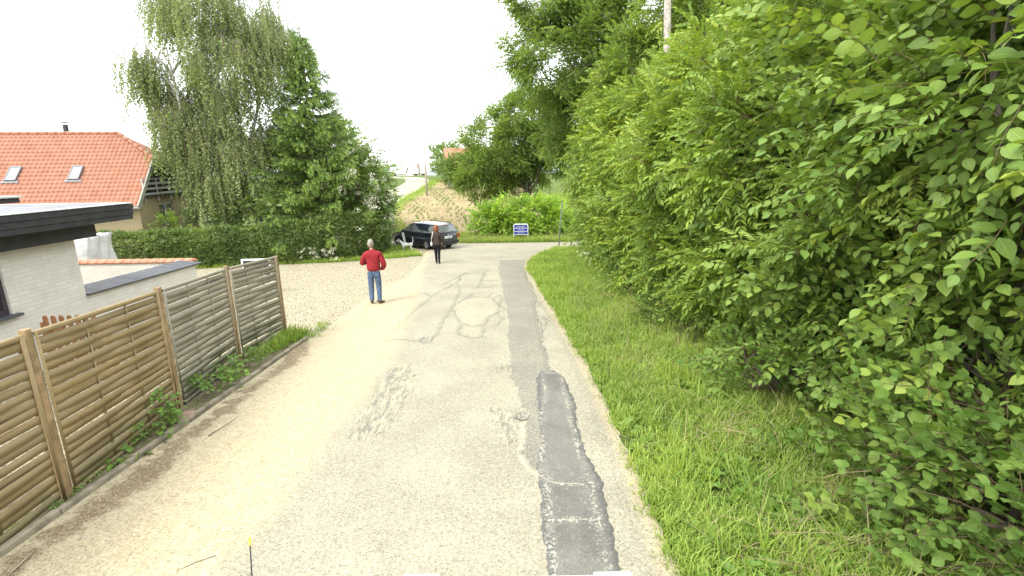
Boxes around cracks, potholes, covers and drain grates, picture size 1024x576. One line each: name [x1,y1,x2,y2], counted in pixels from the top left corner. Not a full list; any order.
crack [500,411,586,486]
crack [383,256,549,367]
